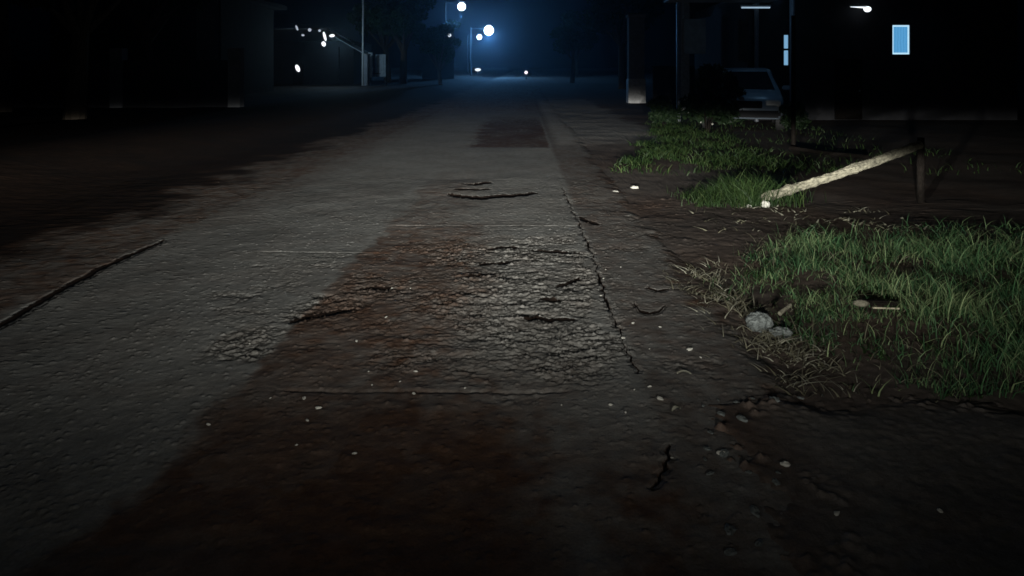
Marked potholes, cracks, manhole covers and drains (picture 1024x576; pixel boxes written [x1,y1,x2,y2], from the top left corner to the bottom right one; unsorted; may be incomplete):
crack [465,188,669,374]
crack [448,182,538,200]
crack [290,286,392,324]
crack [647,443,677,490]
